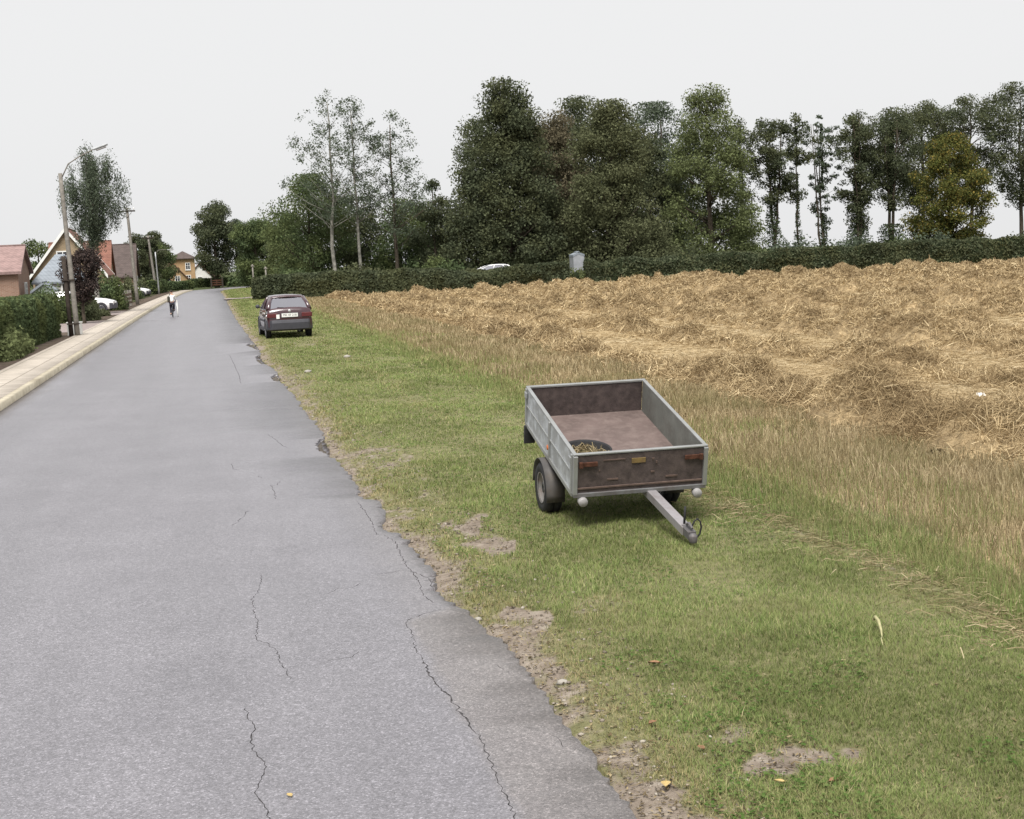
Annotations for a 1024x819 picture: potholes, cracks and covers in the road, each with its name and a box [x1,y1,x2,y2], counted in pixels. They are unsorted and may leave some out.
crack [244,707,271,819]
crack [252,574,291,679]
crack [358,503,433,602]
pothole [315,439,330,455]
